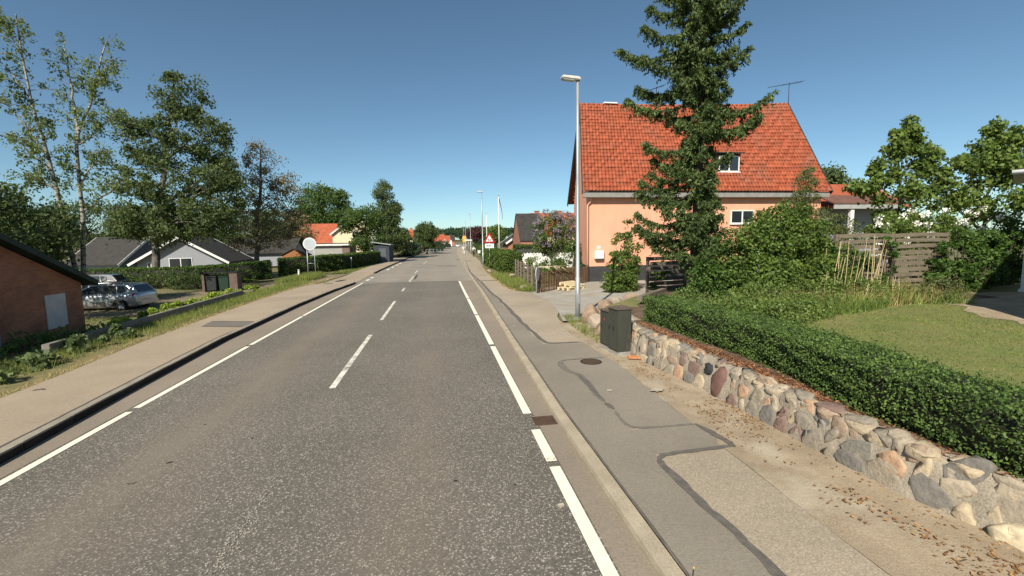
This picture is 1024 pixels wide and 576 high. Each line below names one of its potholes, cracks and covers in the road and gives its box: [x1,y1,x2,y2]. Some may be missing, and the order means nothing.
drain grate [532,415,558,426]
